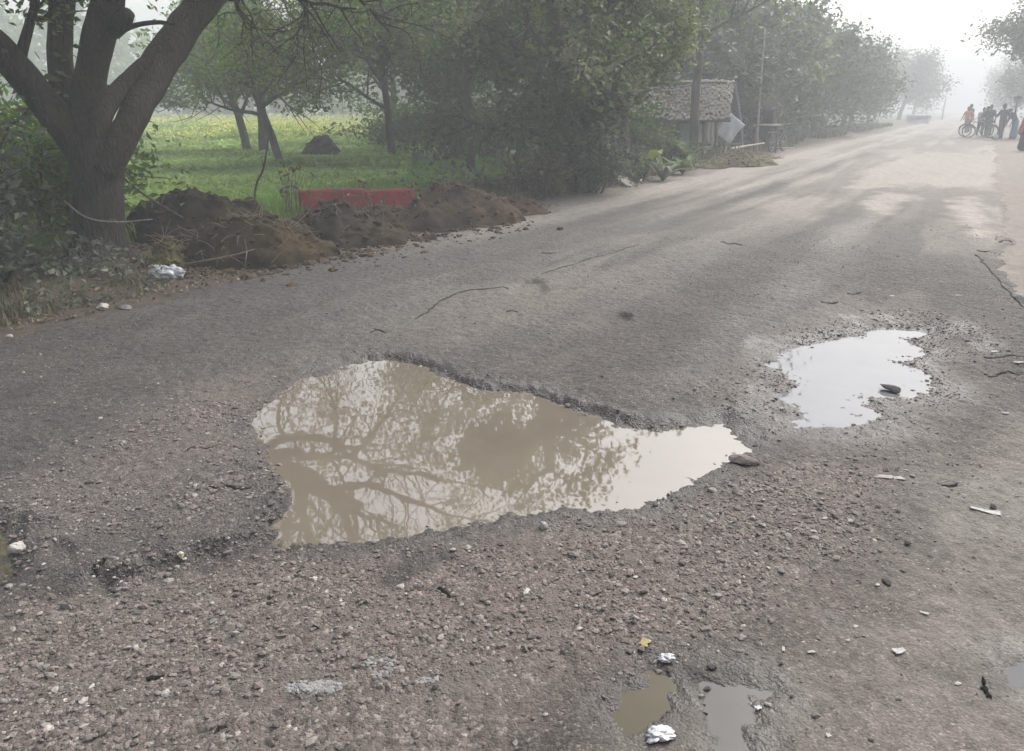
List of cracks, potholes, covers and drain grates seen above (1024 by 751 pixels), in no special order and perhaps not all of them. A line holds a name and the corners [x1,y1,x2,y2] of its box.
crack [983,355,1024,378]
crack [975,240,1024,307]
pothole [604,663,688,743]
pothole [675,661,775,751]
pothole [229,347,782,554]
pothole [752,318,950,432]
crack [414,287,508,319]
